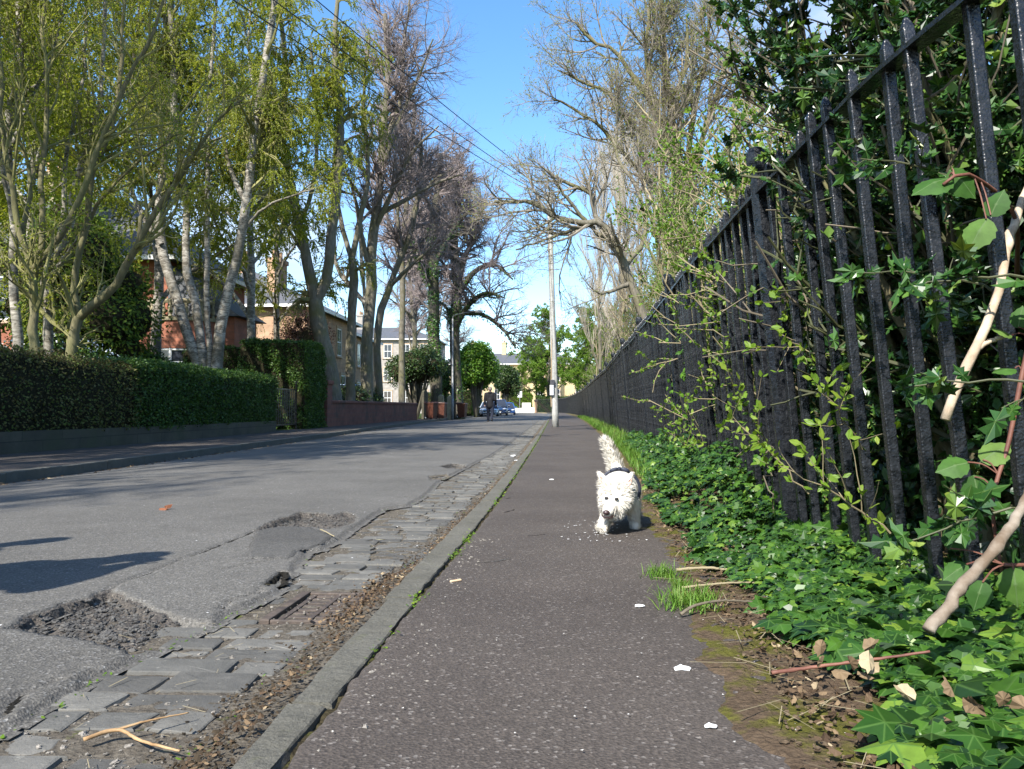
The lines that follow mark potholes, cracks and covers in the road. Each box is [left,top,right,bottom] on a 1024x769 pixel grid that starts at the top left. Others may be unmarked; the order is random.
pothole [265,572,291,589]
pothole [11,589,194,655]
pothole [253,512,356,532]
drain grate [259,591,373,624]
